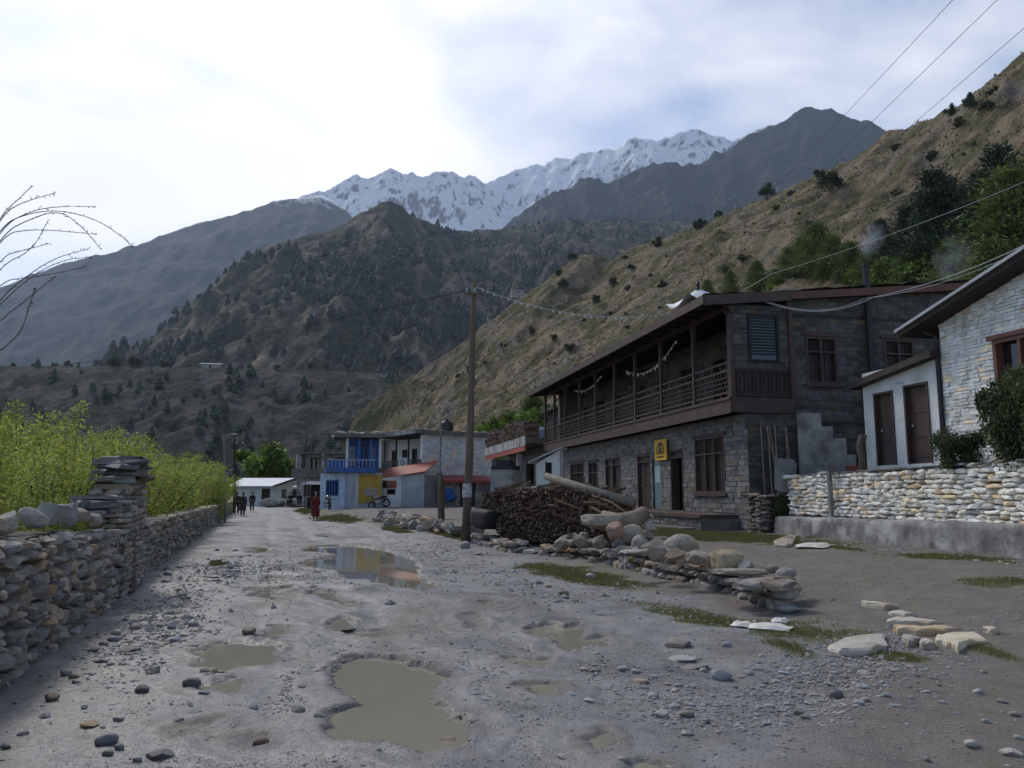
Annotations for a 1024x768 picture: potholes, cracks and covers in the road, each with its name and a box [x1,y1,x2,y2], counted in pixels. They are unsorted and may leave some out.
pothole [281,649,522,768]
pothole [288,544,459,592]
pothole [159,634,312,687]
pothole [301,611,379,634]
pothole [321,623,414,643]
pothole [481,672,600,706]
pothole [501,618,641,659]
